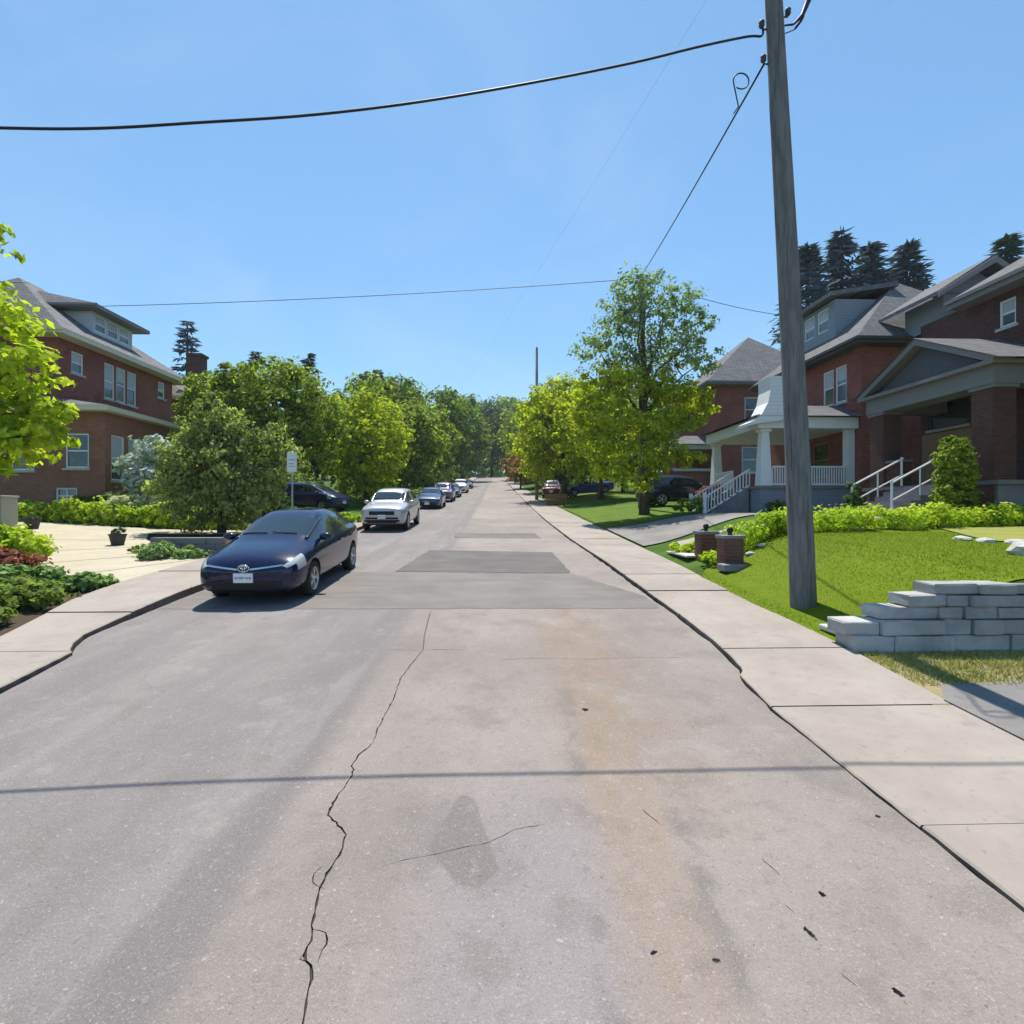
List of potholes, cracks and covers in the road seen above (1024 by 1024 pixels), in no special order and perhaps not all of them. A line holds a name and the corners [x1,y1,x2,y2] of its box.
crack [387,824,544,865]
crack [299,613,452,1024]
